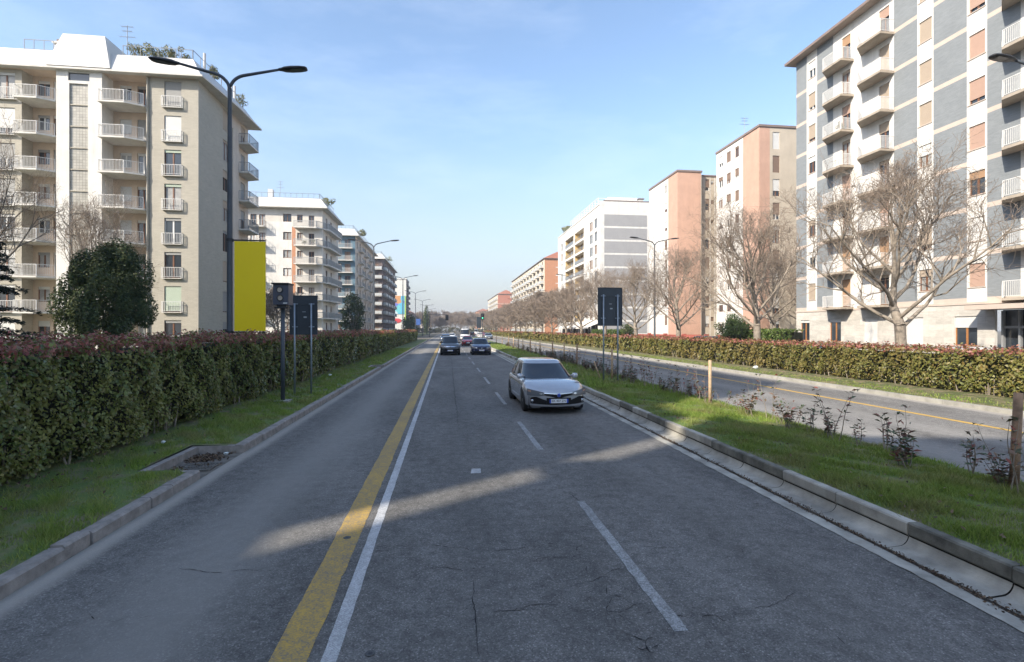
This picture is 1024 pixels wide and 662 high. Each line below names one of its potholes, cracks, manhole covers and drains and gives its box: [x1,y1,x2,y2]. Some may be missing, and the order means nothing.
crack [436,539,660,655]
